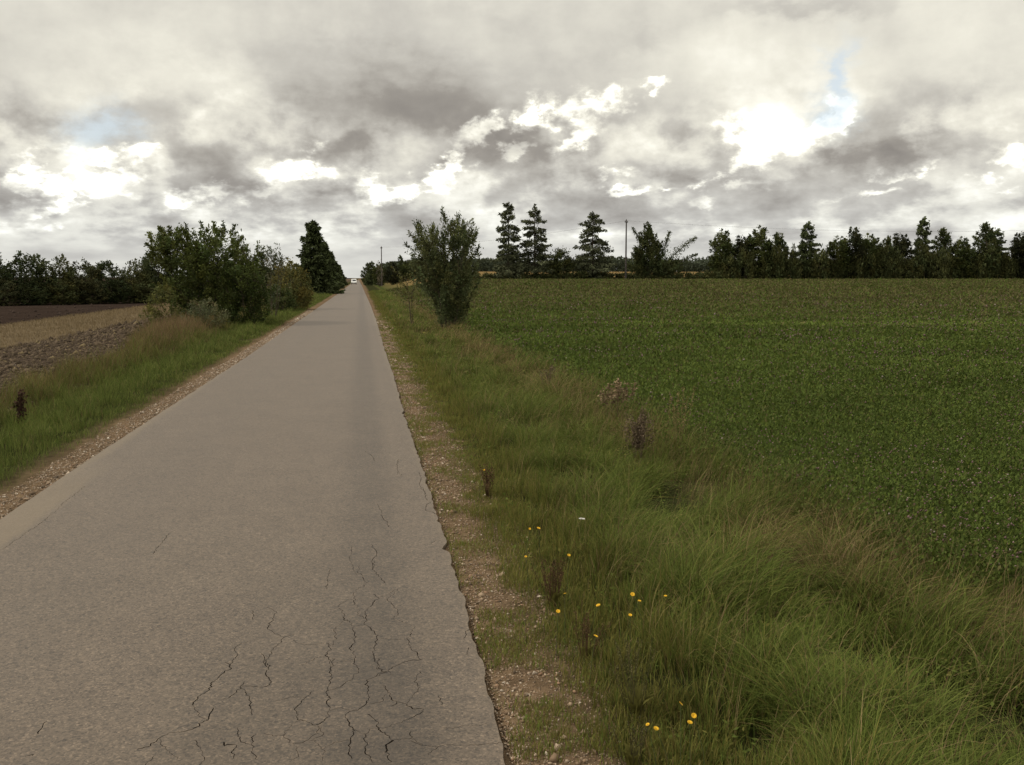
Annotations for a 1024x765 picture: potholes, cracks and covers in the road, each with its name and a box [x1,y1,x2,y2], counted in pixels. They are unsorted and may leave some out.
crack [139,609,284,765]
crack [267,566,423,763]
